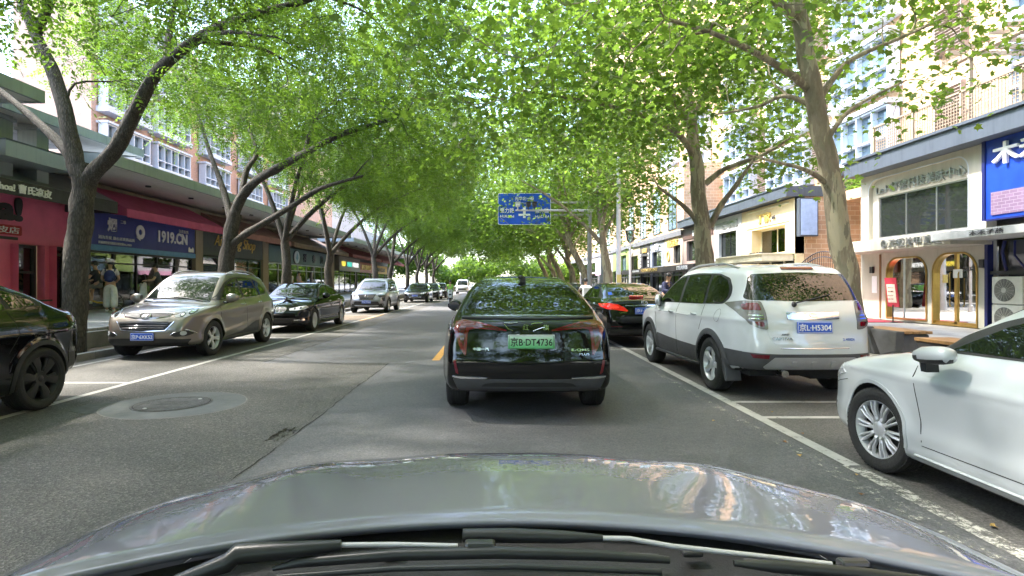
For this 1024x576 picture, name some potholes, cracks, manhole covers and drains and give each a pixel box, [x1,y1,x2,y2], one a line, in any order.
pothole [265,427,297,441]
manhole cover [70,392,247,420]
